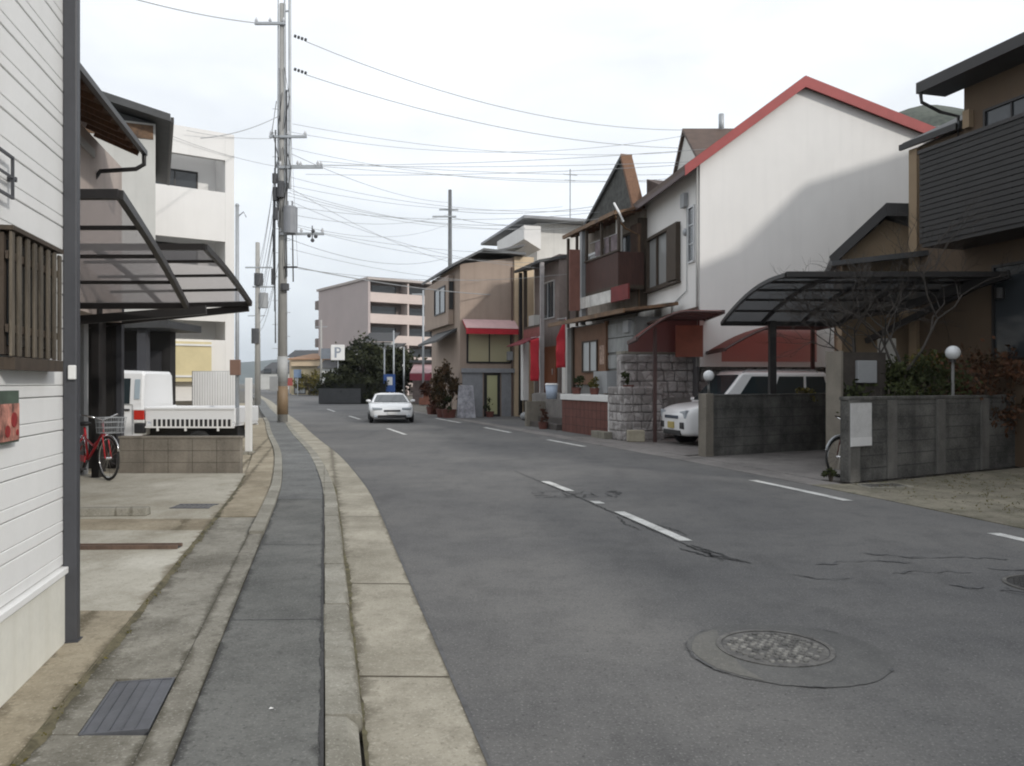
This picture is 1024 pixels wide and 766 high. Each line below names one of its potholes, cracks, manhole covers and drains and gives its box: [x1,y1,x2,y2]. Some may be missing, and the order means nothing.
manhole cover [1002,574,1024,590]
crack [516,471,750,563]
drain grate [78,677,175,736]
manhole cover [685,623,894,688]
crack [795,552,1024,594]
